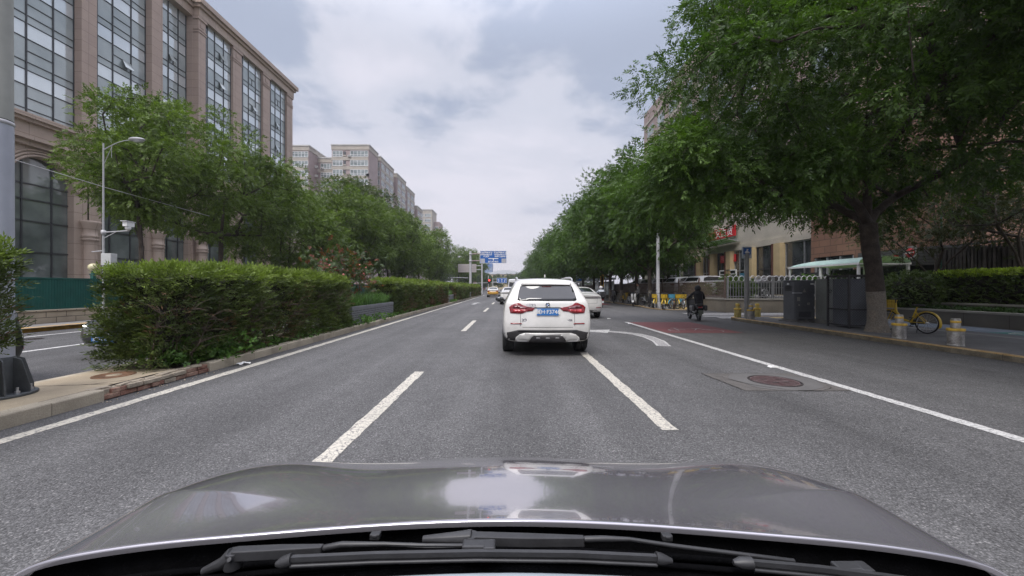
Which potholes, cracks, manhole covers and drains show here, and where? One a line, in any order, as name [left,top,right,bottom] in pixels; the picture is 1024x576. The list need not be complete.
manhole cover [747,375,804,387]
